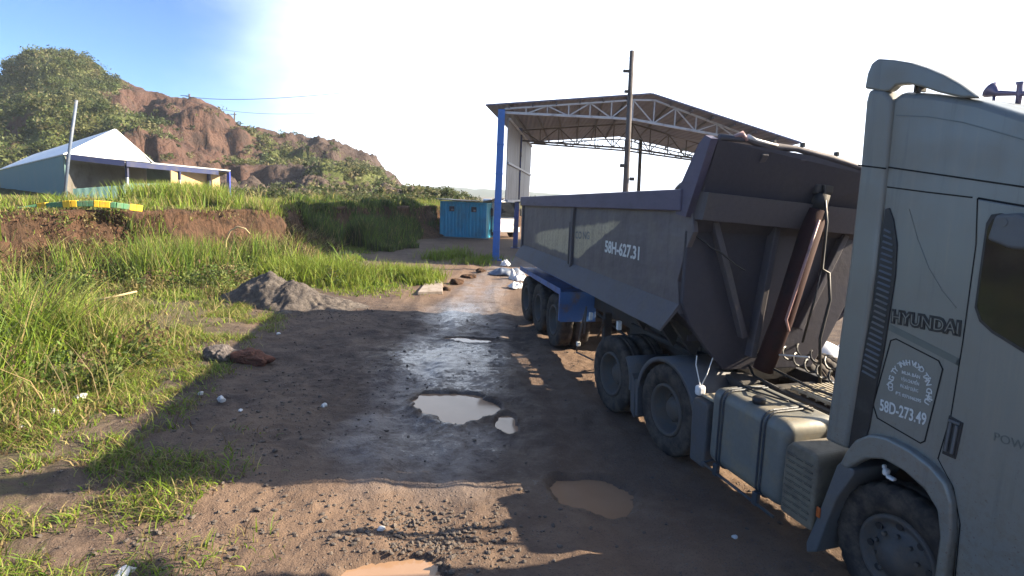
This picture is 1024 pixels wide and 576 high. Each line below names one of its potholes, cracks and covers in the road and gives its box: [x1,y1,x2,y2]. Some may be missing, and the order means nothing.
pothole [490,409,523,436]
pothole [319,547,457,576]
pothole [406,387,510,428]
pothole [538,471,649,524]
